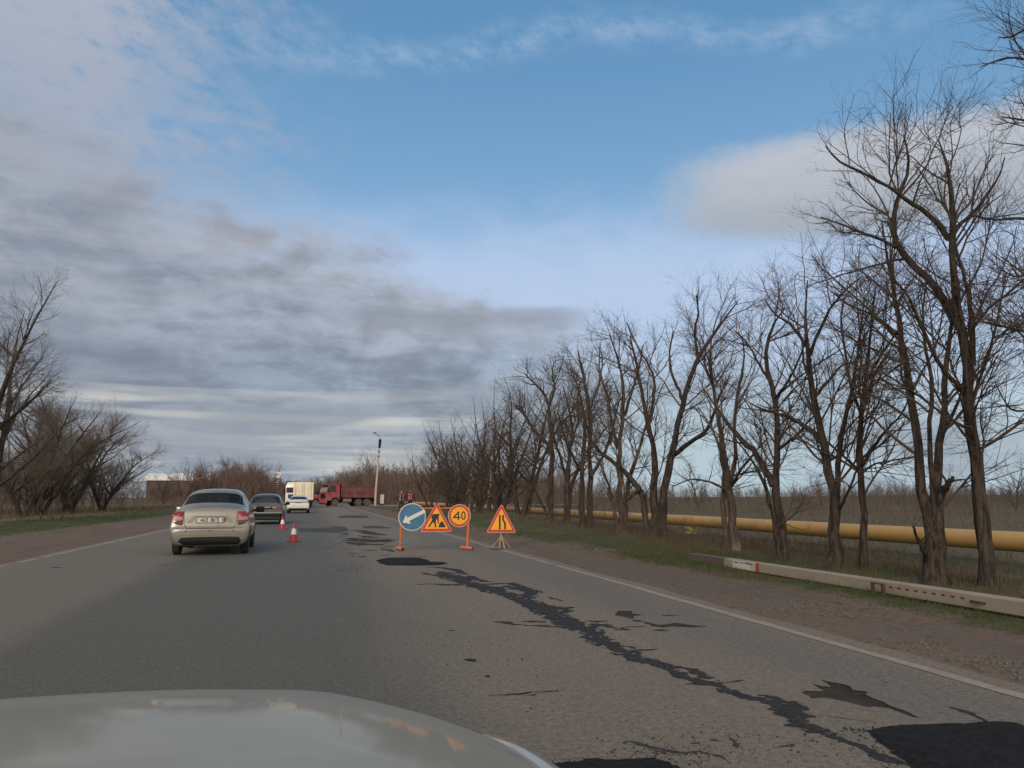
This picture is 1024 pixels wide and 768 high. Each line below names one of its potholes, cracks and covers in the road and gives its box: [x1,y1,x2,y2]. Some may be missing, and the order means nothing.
crack [343,530,915,768]
